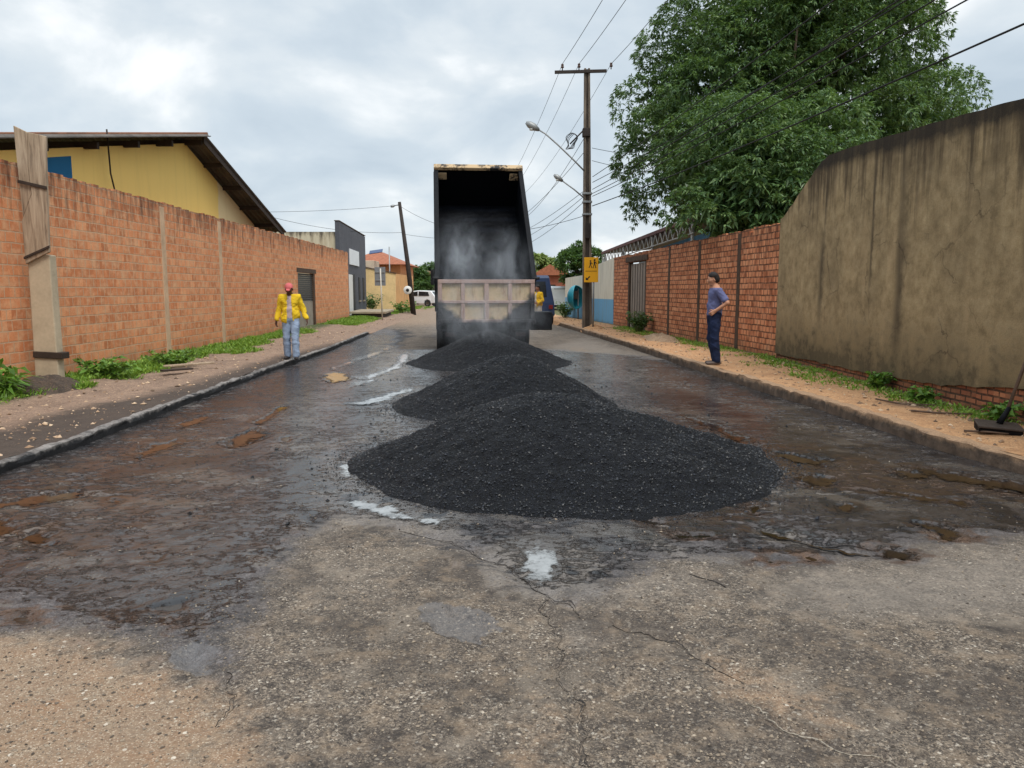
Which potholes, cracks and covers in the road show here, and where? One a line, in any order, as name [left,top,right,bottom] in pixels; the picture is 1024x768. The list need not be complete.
crack [400,531,592,768]
pothole [909,519,980,542]
crack [747,701,903,768]
pothole [510,538,582,588]
pothole [216,427,277,448]
pothole [789,471,846,487]
pothole [249,405,292,425]
pothole [870,545,919,561]
crack [215,672,237,727]
crack [613,625,746,684]
